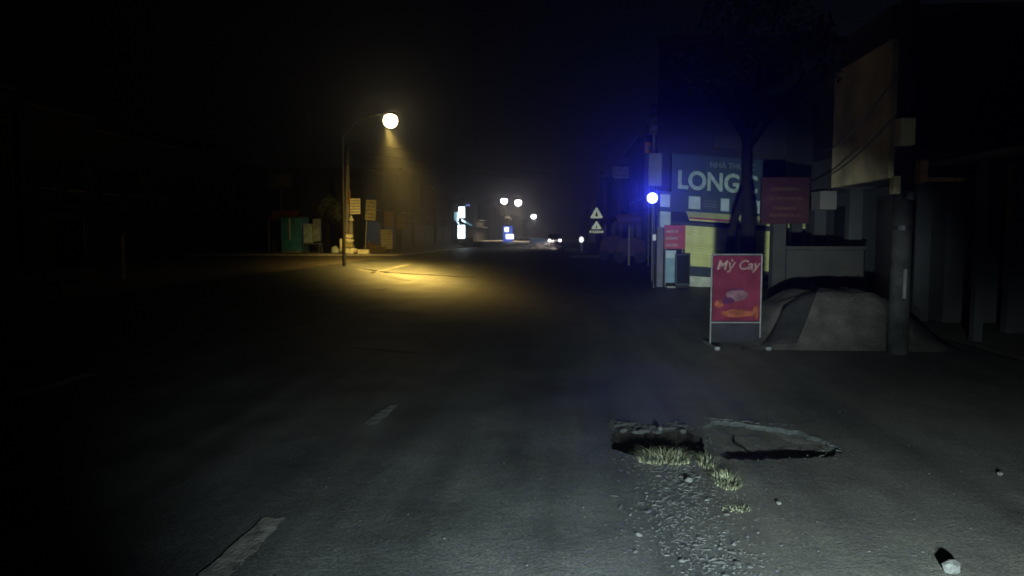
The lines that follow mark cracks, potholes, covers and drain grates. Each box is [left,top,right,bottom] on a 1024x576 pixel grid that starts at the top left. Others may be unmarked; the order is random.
pothole [697,417,866,463]
pothole [606,419,705,458]
